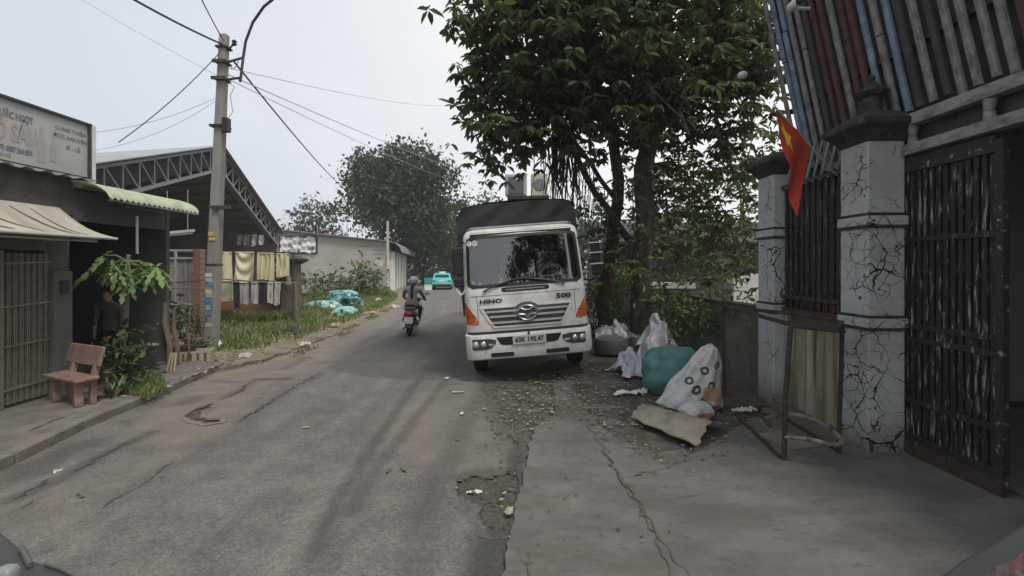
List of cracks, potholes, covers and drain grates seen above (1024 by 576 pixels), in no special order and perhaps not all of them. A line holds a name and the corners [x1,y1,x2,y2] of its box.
pothole [177,402,227,426]
crack [103,463,172,508]
pothole [444,467,524,540]
crack [14,437,142,508]
crack [225,372,321,421]
crack [587,424,703,576]
